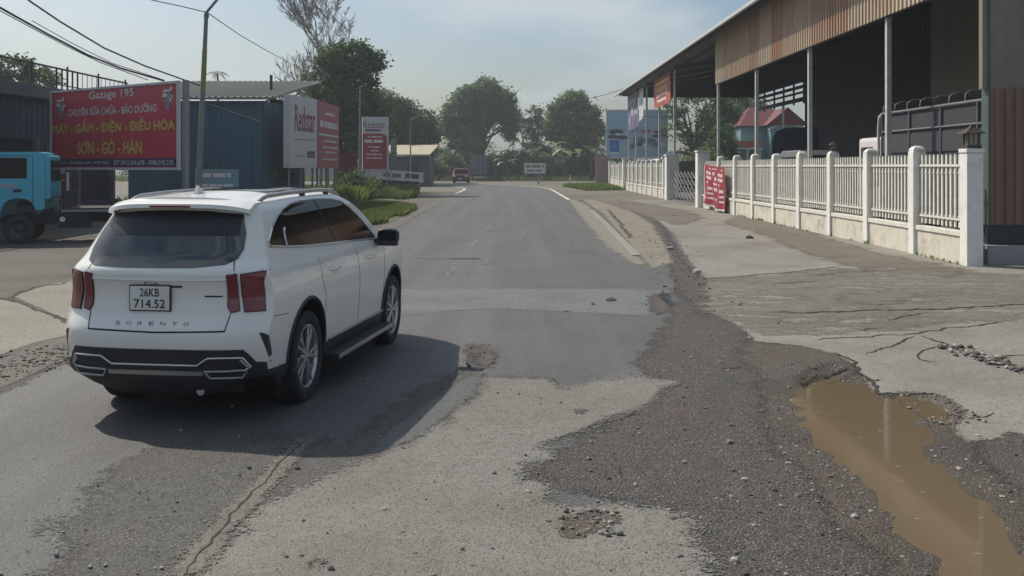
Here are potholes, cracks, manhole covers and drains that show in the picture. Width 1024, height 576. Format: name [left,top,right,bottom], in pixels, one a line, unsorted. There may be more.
crack [7,281,68,301]
pothole [460,342,508,370]
crack [164,436,321,576]
pothole [553,506,625,539]
pothole [646,293,672,314]
pothole [745,373,1024,576]
crack [777,303,1024,395]
